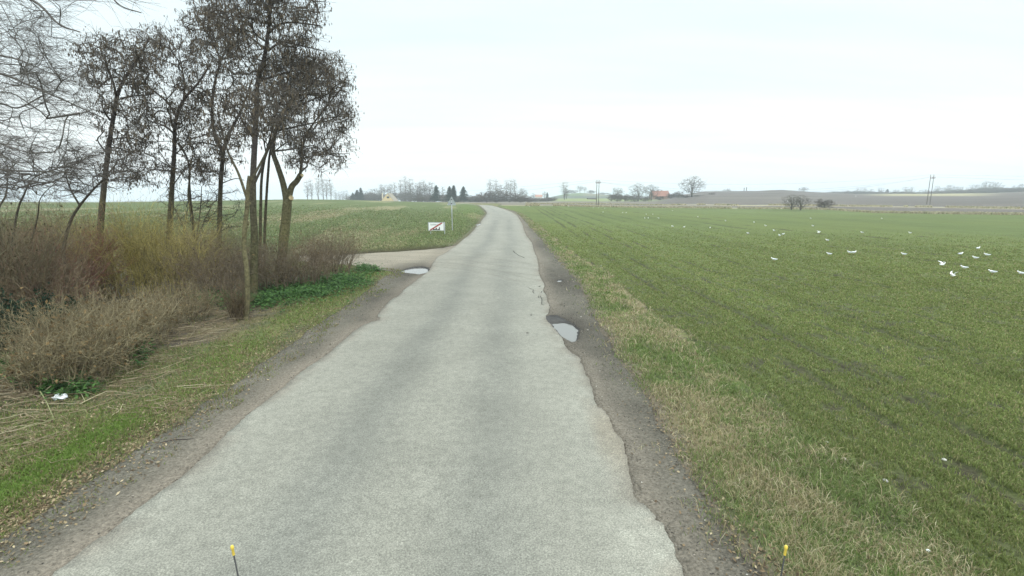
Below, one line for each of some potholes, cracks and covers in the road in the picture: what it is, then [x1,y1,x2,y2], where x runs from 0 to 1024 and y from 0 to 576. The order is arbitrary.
pothole [400,266,430,274]
pothole [546,315,580,342]
